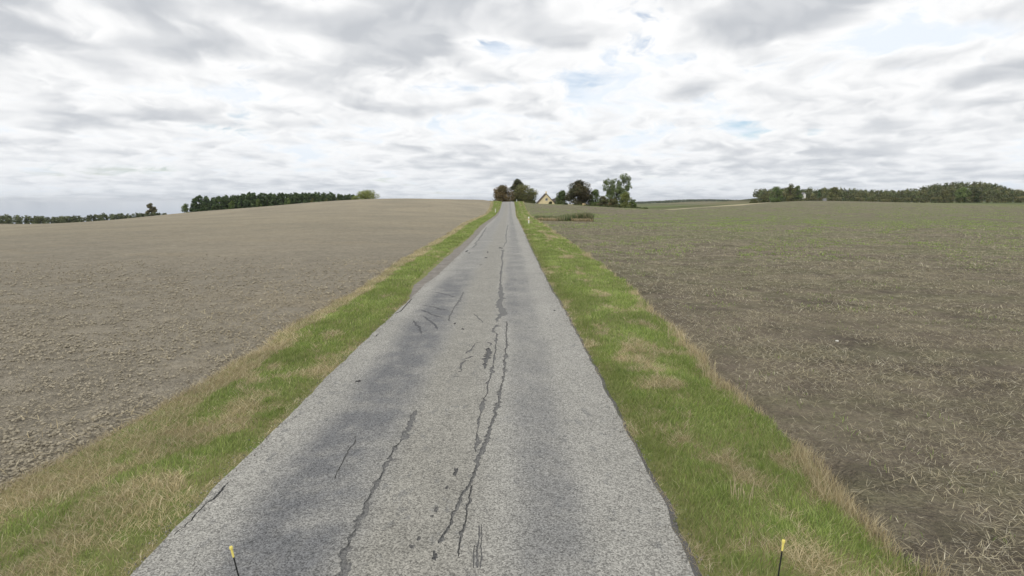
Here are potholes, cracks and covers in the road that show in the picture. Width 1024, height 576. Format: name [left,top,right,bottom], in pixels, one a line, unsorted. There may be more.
crack [395,225,509,568]
crack [173,482,229,536]
crack [334,410,417,576]
